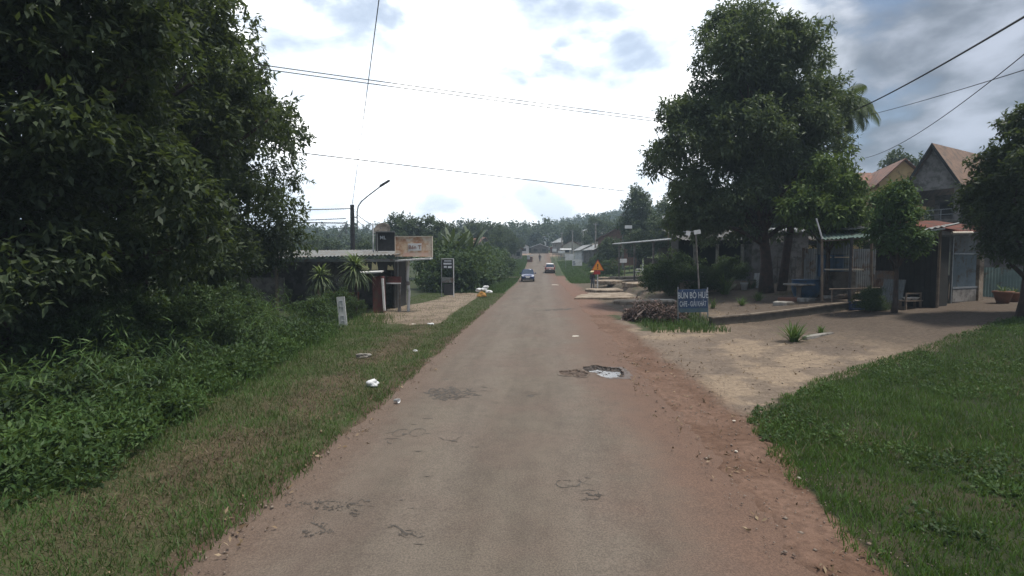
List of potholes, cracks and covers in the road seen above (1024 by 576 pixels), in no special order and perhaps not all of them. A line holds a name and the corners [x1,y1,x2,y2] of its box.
crack [285,497,375,537]
pothole [579,364,633,379]
crack [389,524,425,545]
crack [387,418,473,447]
pothole [557,369,591,378]
crack [556,477,605,500]
